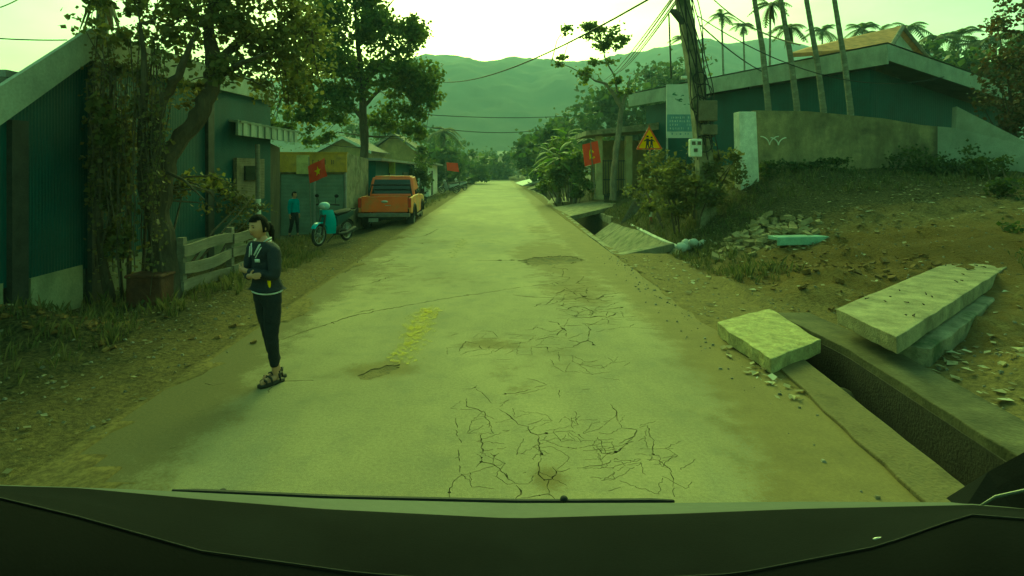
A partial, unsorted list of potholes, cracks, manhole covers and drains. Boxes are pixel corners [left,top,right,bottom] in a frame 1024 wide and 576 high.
crack [281,259,518,340]
crack [446,265,649,380]
crack [448,352,694,499]
